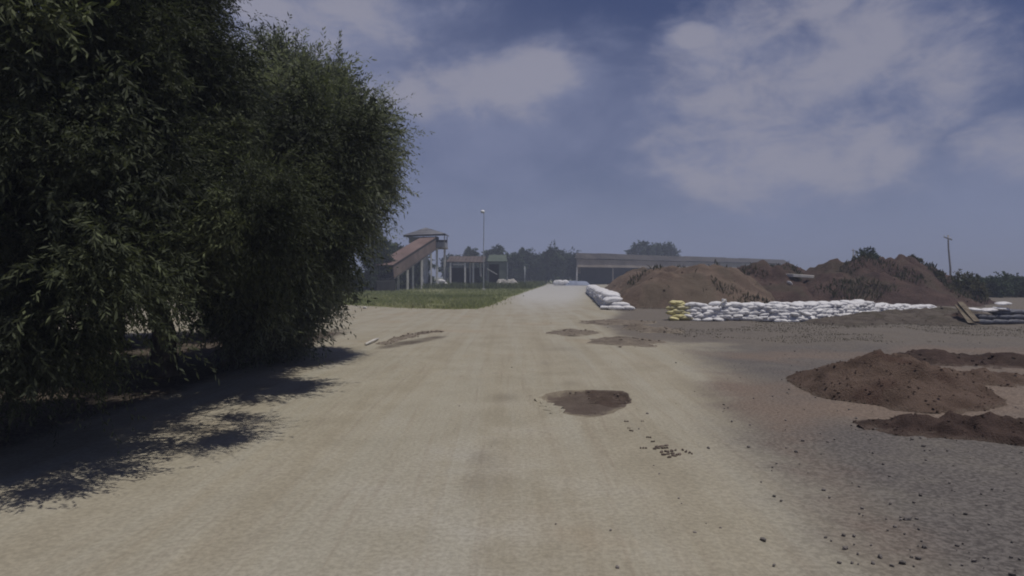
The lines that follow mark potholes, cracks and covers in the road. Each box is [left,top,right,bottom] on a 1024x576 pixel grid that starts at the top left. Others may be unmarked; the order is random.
pothole [527,388,642,422]
